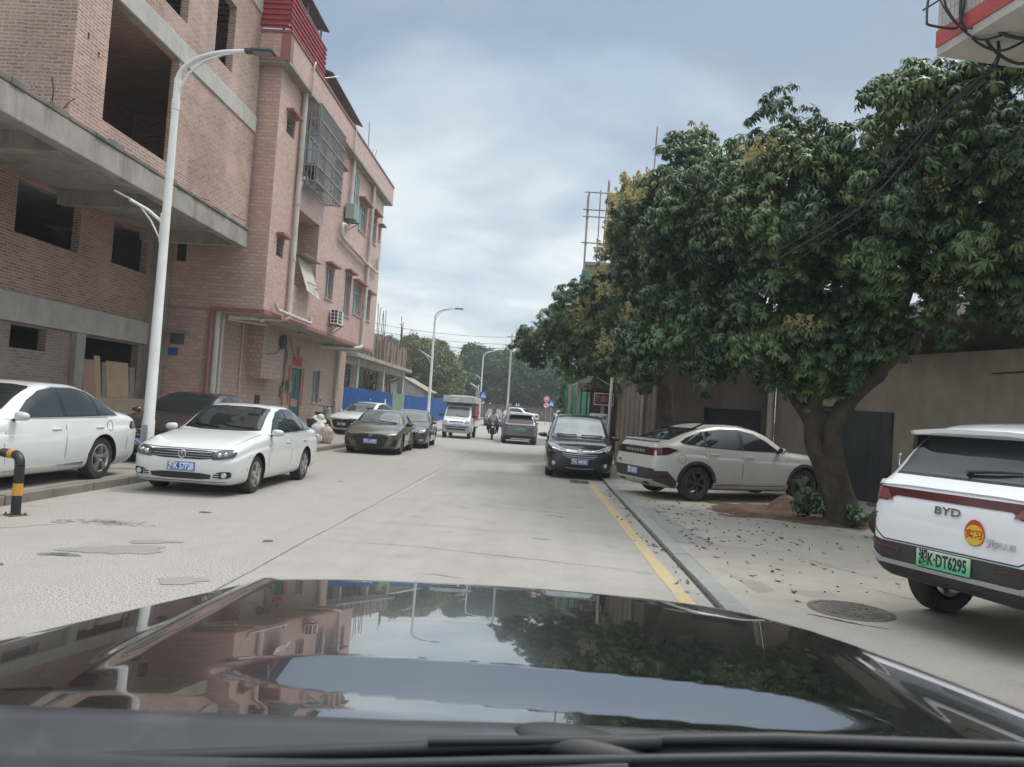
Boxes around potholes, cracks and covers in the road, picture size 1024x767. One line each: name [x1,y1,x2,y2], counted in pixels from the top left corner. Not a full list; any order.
manhole cover [807,600,896,622]
